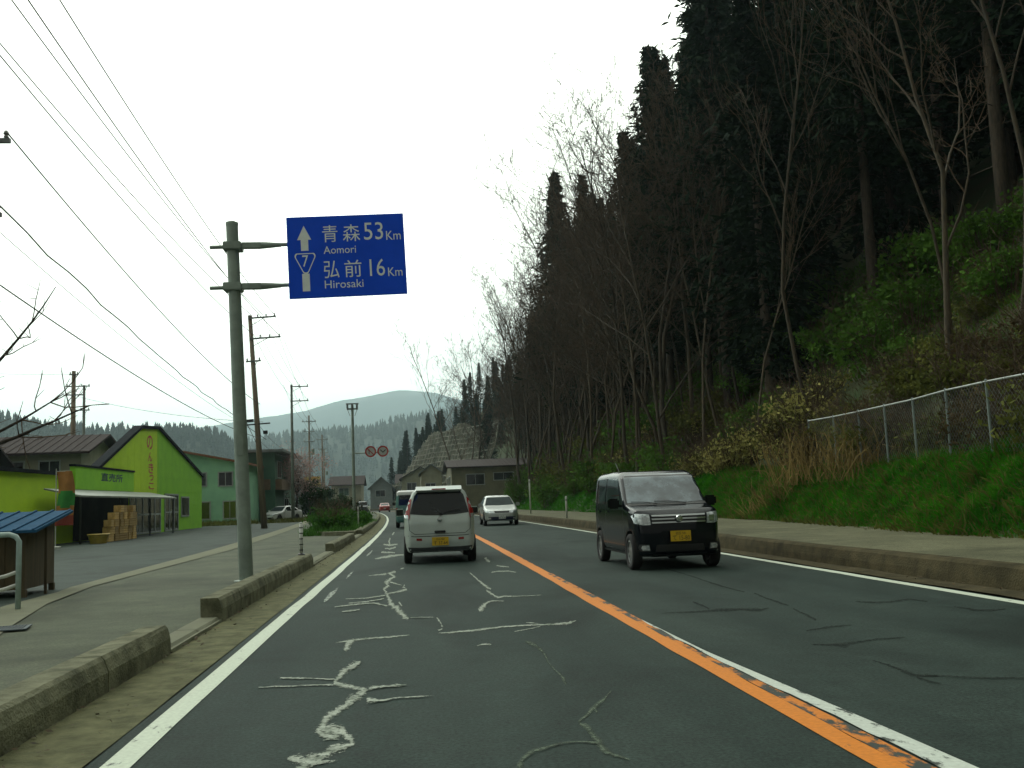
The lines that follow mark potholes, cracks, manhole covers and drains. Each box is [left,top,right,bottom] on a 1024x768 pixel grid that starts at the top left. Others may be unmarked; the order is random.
crack [437,557,630,768]
crack [666,568,901,646]
crack [258,532,431,768]
crack [880,662,1023,682]
